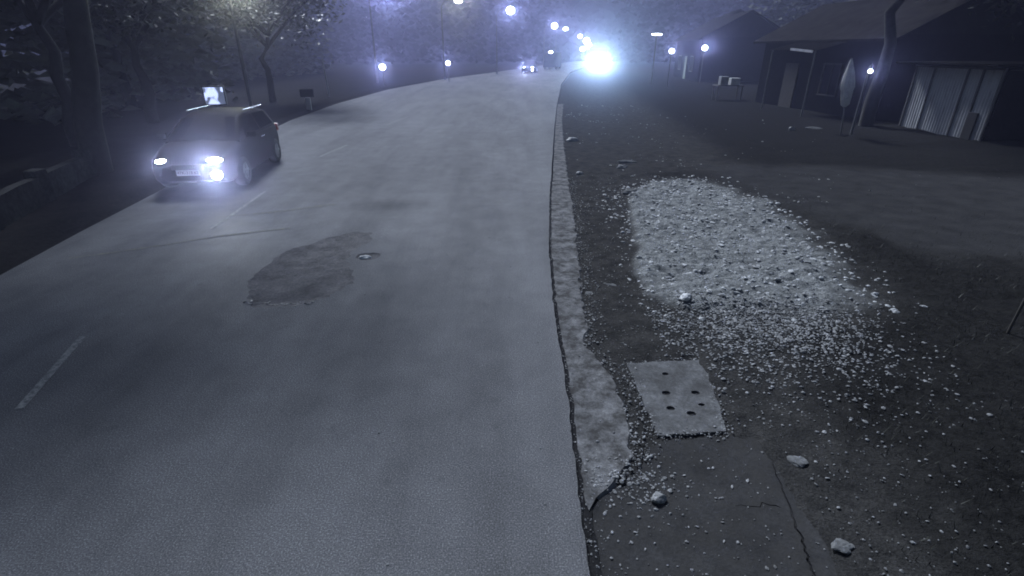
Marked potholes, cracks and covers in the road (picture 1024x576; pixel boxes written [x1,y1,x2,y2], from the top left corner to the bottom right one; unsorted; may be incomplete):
crack [736,464,816,576]
manhole cover [627,360,726,438]
